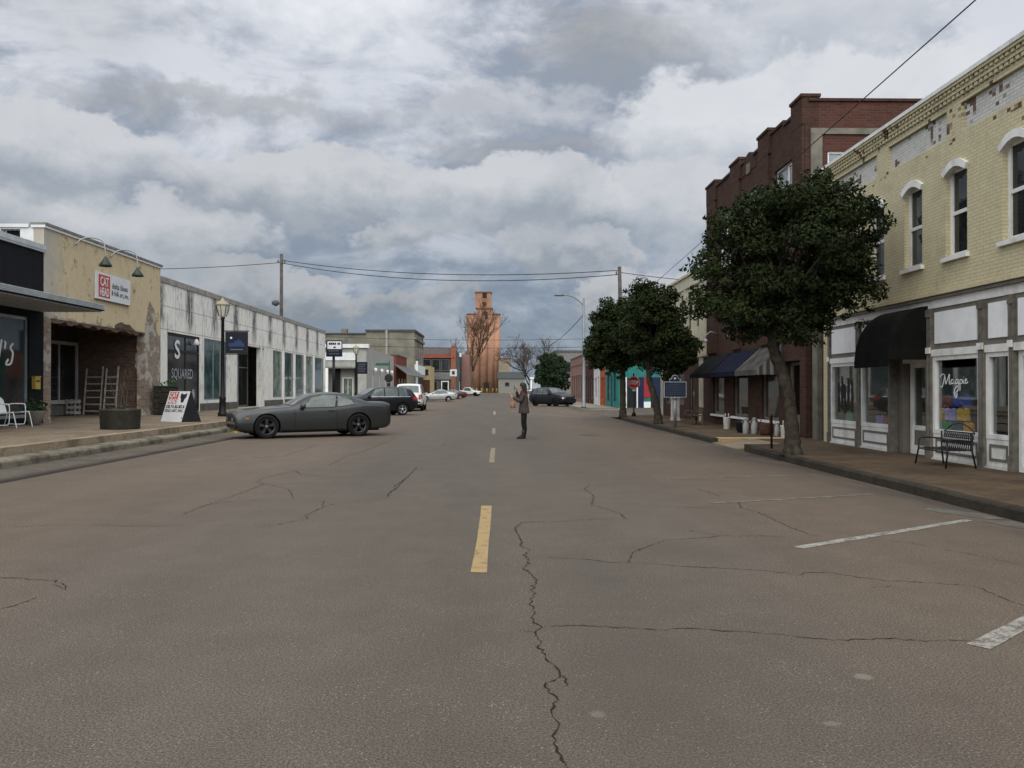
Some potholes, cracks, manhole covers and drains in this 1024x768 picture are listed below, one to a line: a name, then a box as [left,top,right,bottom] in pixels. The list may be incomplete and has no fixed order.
crack [14,436,399,527]
crack [514,486,969,768]
